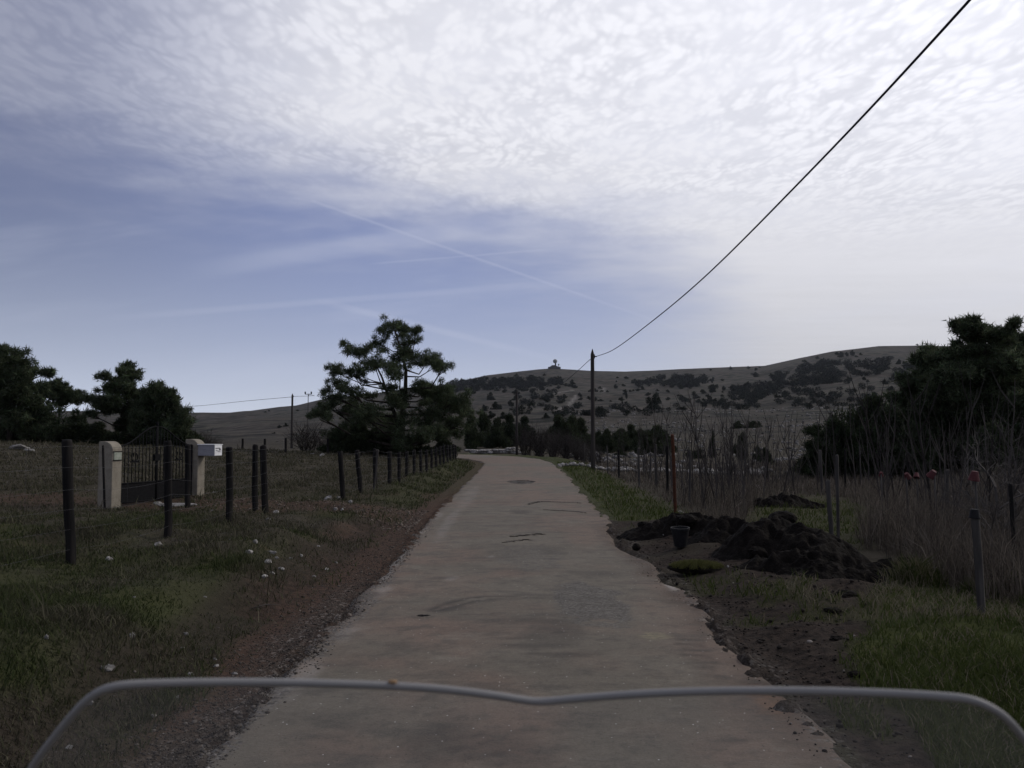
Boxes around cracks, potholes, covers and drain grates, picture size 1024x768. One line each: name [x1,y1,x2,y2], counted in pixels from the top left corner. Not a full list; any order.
crack [502,534,541,543]
crack [525,501,586,513]
